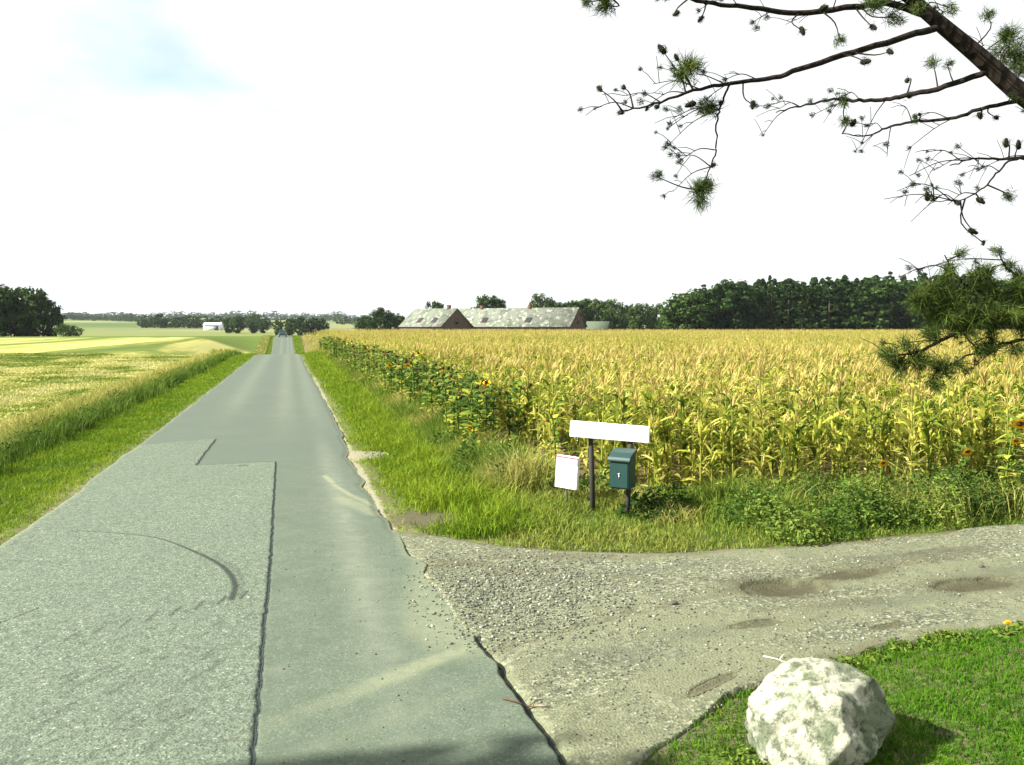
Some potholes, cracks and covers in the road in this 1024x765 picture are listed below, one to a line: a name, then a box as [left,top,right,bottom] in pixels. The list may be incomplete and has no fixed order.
pothole [813,569,886,580]
pothole [727,619,786,629]
pothole [926,577,1022,592]
pothole [685,672,737,698]
pothole [738,578,824,597]
